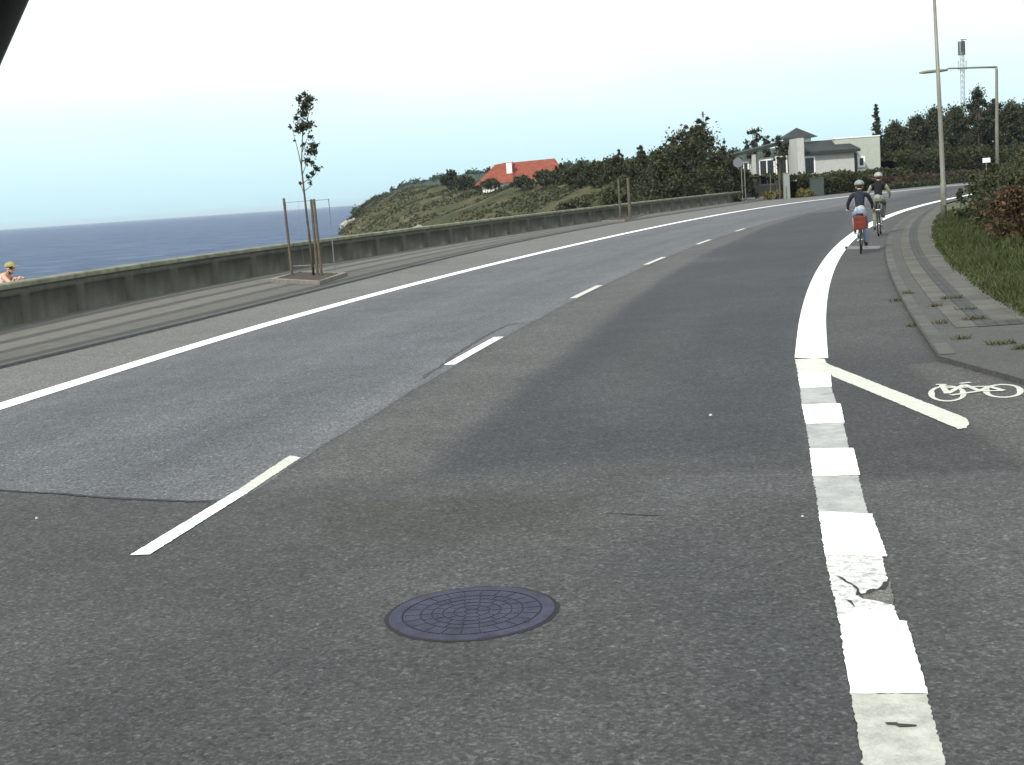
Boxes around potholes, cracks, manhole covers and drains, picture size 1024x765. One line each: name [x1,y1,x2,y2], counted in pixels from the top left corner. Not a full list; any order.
manhole cover [384,586,560,642]
crack [833,572,894,606]
